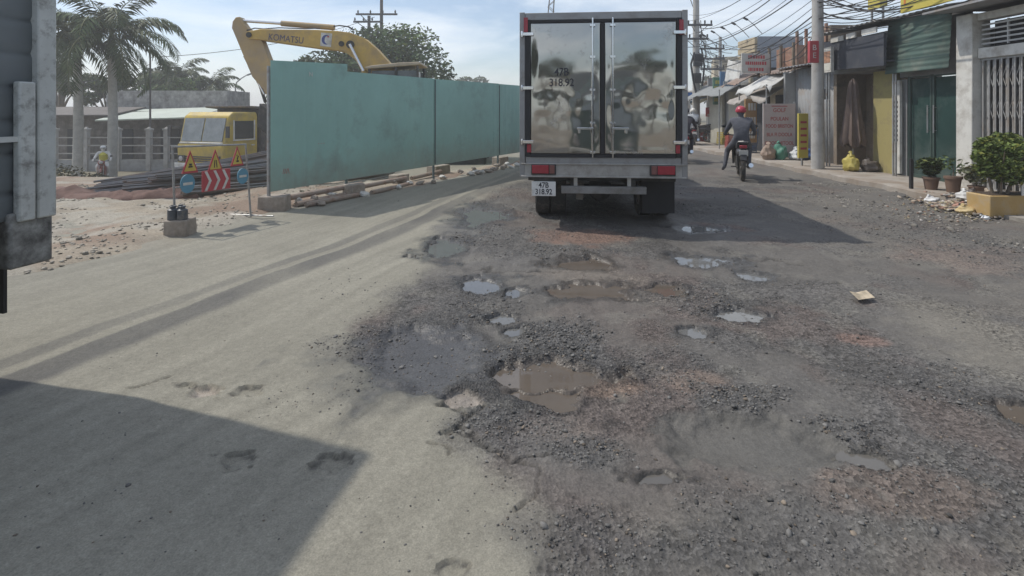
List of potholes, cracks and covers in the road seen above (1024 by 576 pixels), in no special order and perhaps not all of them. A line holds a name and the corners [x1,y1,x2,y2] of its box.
pothole [486,343,648,431]
pothole [968,387,1024,430]
pothole [436,197,532,237]
pothole [591,388,904,526]
pothole [445,273,537,303]
pothole [717,266,781,287]
pothole [671,324,724,340]
pothole [399,232,479,276]
pothole [531,279,656,306]
